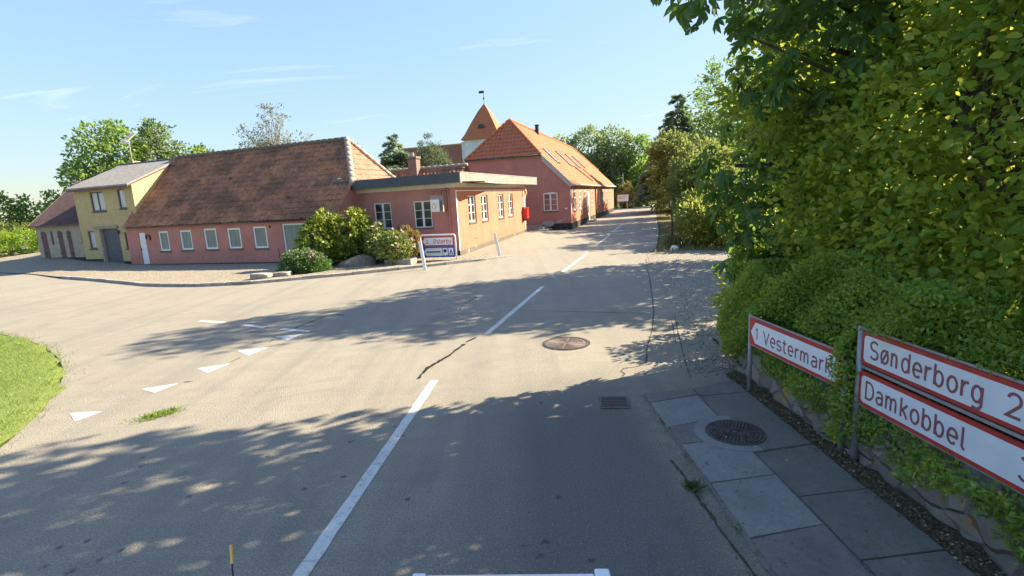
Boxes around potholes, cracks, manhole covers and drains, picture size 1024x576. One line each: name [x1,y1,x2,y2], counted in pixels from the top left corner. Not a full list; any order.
drain grate [598,396,631,409]
manhole cover [542,337,590,351]
manhole cover [694,416,769,453]
crack [417,337,477,379]
